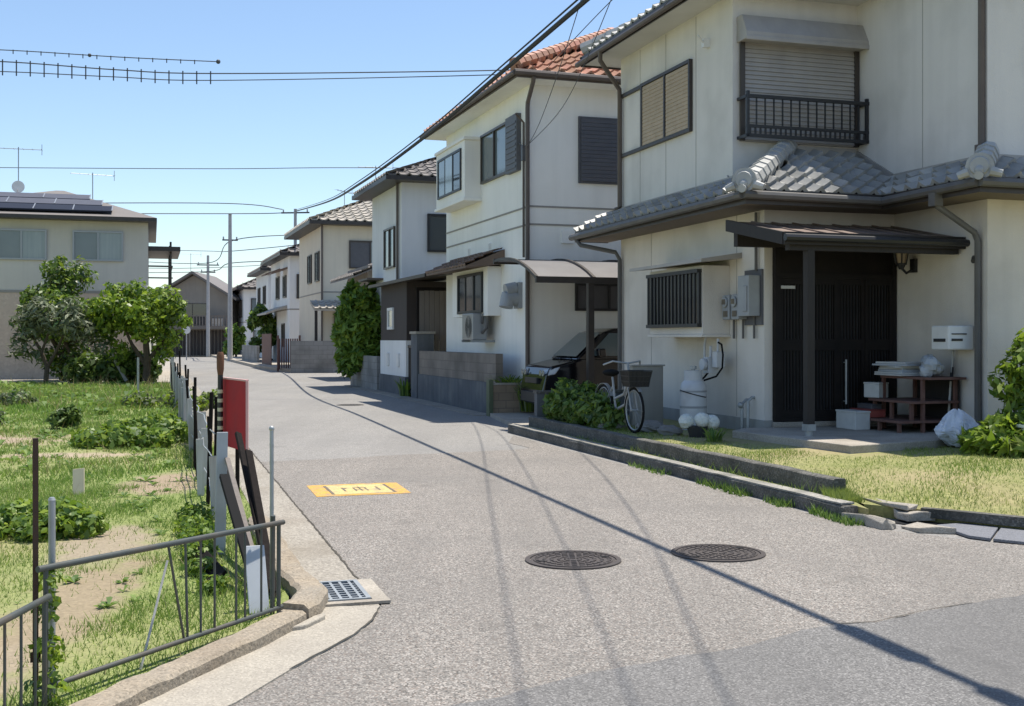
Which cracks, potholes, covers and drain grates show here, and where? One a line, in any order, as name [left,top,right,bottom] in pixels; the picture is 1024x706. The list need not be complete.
drain grate [320,579,391,607]
manhole cover [671,544,766,563]
manhole cover [525,550,621,570]
